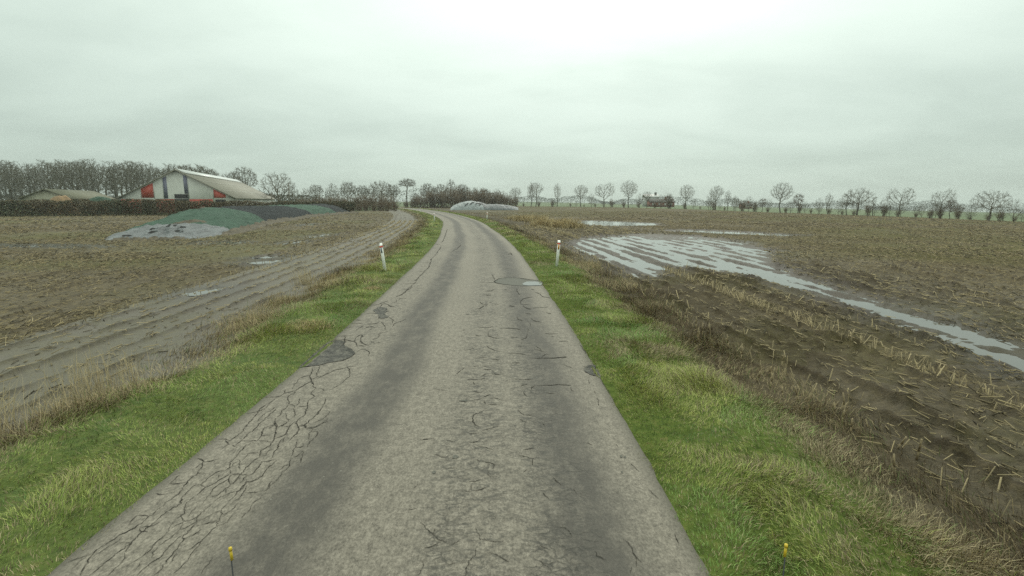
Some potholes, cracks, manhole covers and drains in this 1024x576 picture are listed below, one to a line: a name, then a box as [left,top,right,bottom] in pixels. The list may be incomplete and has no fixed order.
crack [456,277,611,491]
crack [71,231,461,575]
crack [414,508,509,575]
